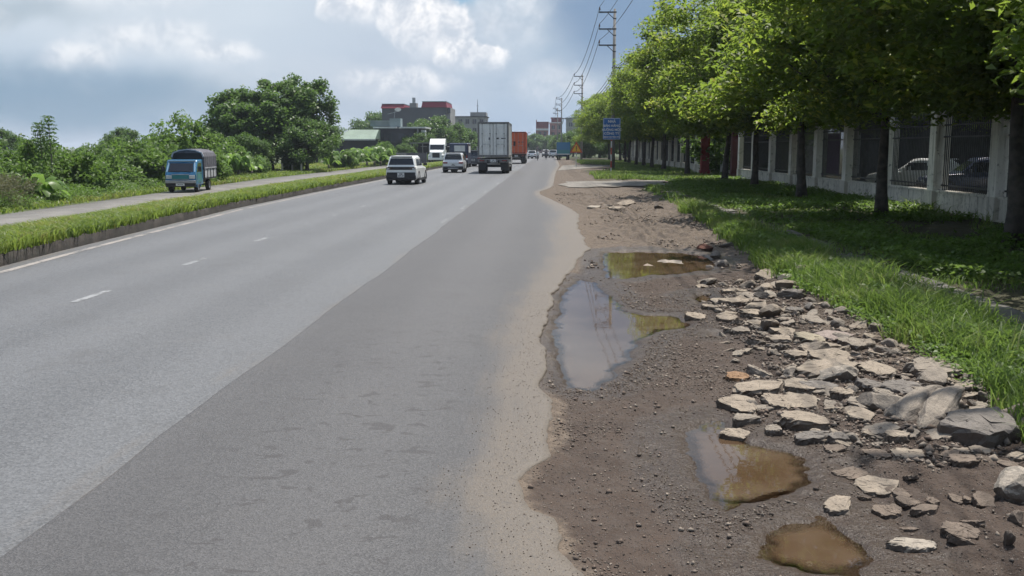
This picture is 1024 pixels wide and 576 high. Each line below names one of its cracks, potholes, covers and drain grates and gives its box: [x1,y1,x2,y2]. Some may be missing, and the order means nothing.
pothole [669,415,832,515]
pothole [545,277,697,392]
pothole [738,501,892,576]
pothole [597,249,720,278]
